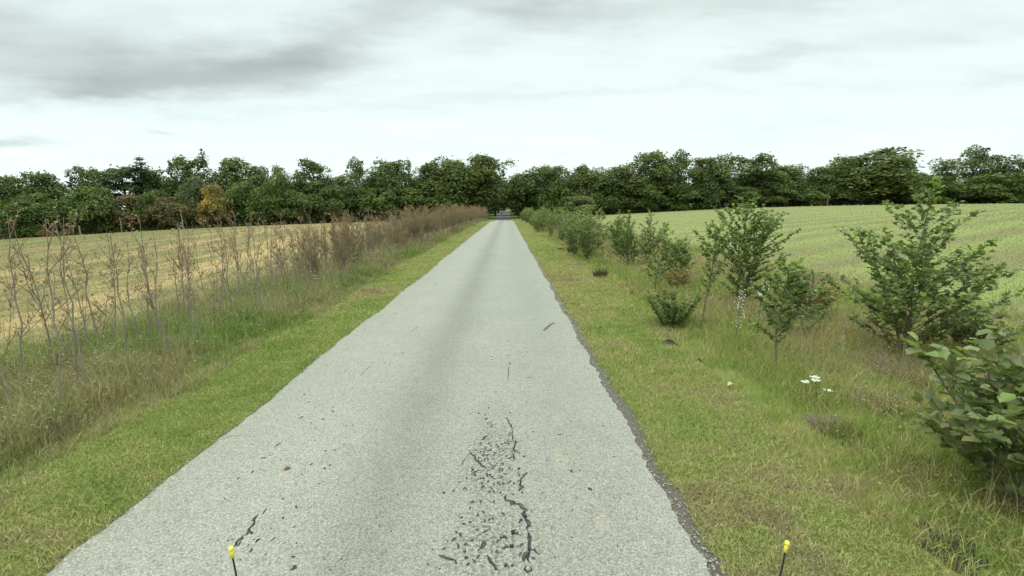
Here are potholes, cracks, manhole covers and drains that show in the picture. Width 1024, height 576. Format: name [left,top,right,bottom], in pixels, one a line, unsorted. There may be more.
crack [462,407,538,574]
crack [234,508,297,571]
